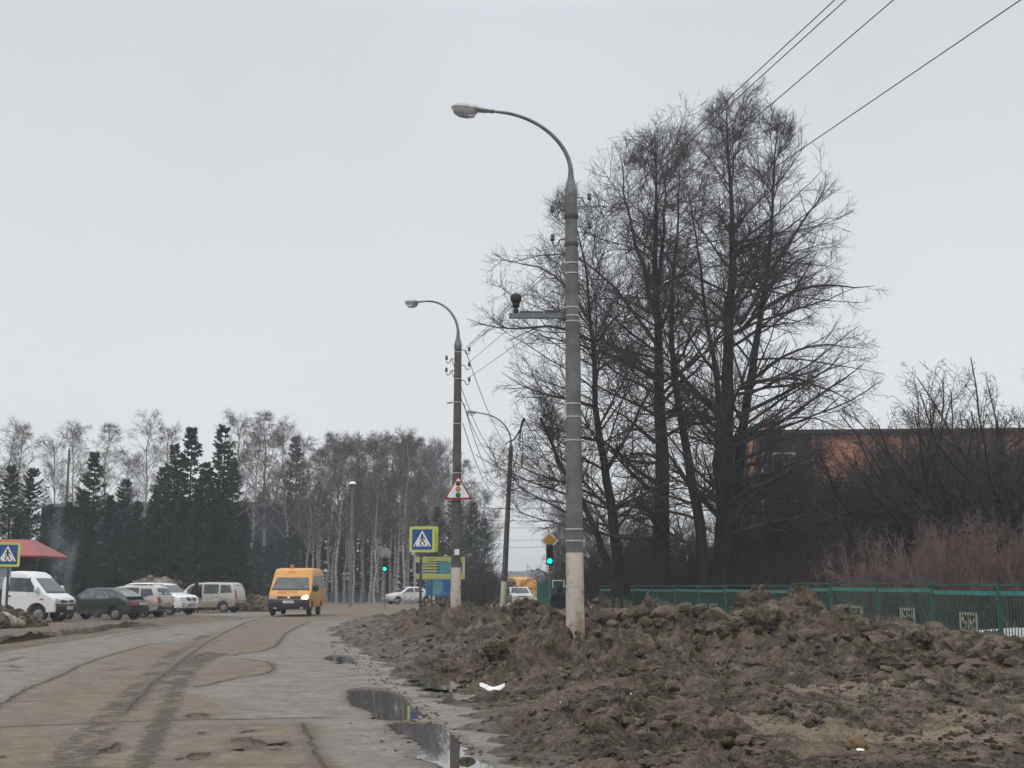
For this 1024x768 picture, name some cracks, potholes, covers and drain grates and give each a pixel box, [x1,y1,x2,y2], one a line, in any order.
crack [0,718,329,768]
pothole [231,737,294,751]
pothole [95,742,121,754]
pothole [346,687,428,719]
